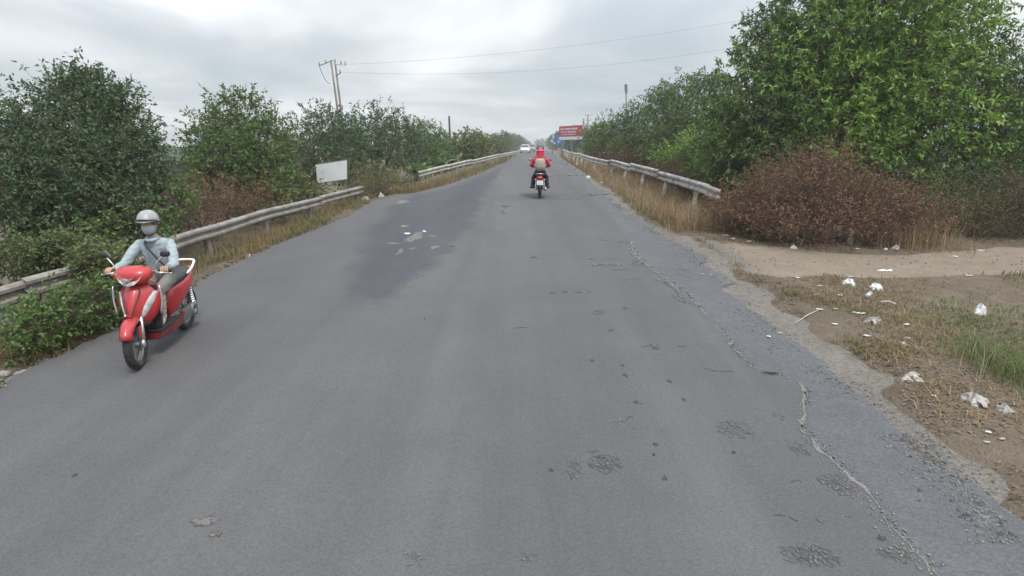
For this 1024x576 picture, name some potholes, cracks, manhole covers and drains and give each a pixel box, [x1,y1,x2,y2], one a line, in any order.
pothole [188,514,221,527]
crack [583,236,947,576]
